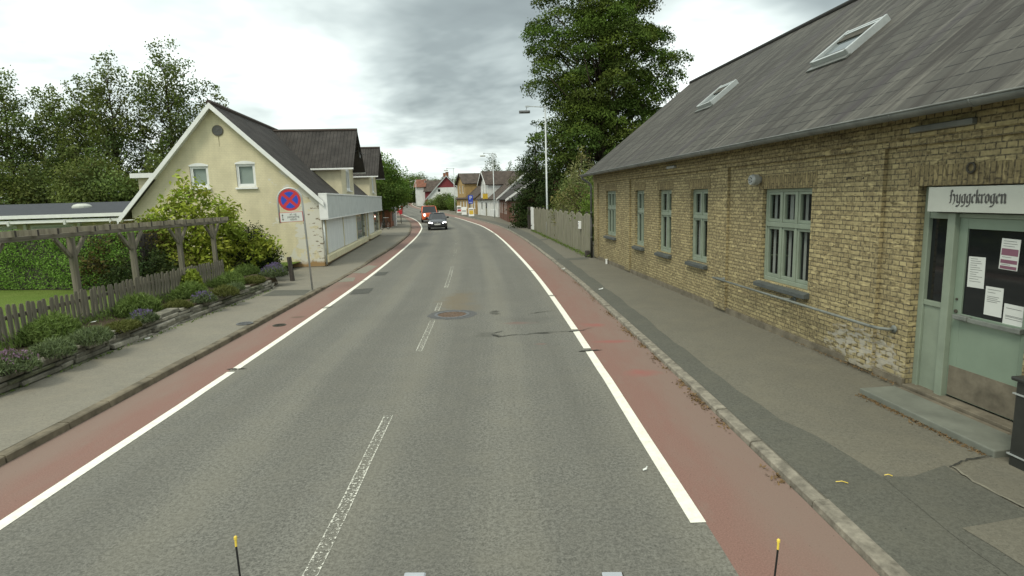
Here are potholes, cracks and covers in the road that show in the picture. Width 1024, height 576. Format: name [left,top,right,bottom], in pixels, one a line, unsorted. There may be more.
manhole cover [427,310,477,320]
